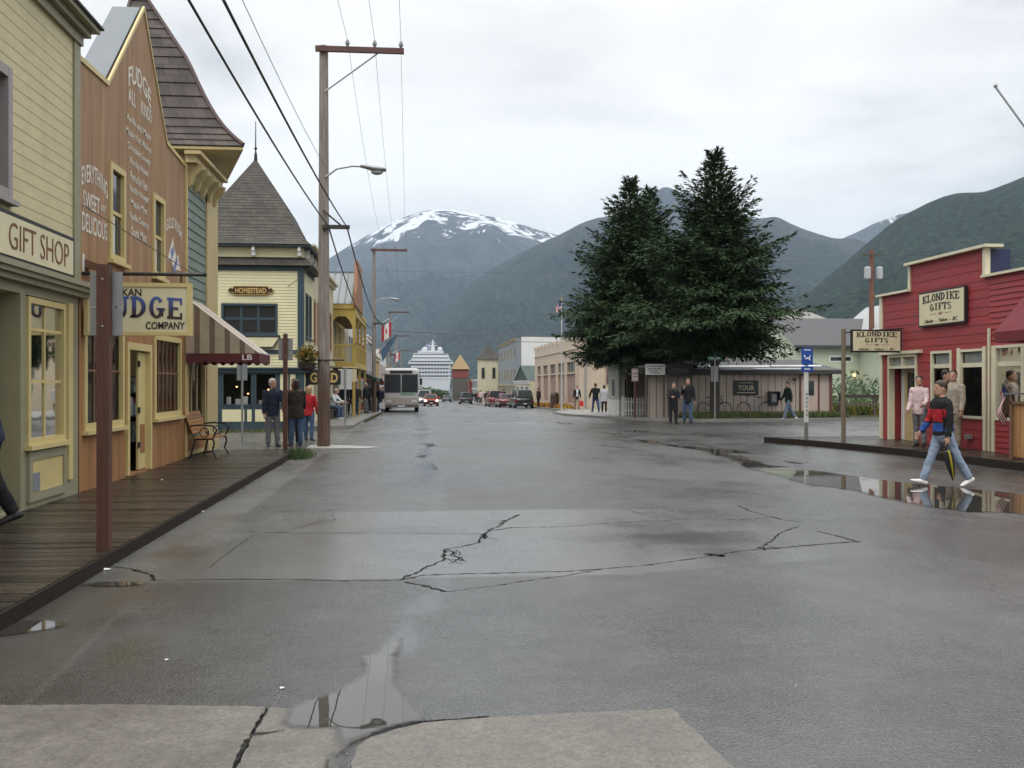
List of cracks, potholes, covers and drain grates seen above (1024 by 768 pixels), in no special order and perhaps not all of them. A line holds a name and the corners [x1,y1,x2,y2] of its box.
crack [416,716,489,724]
crack [111,503,860,592]
